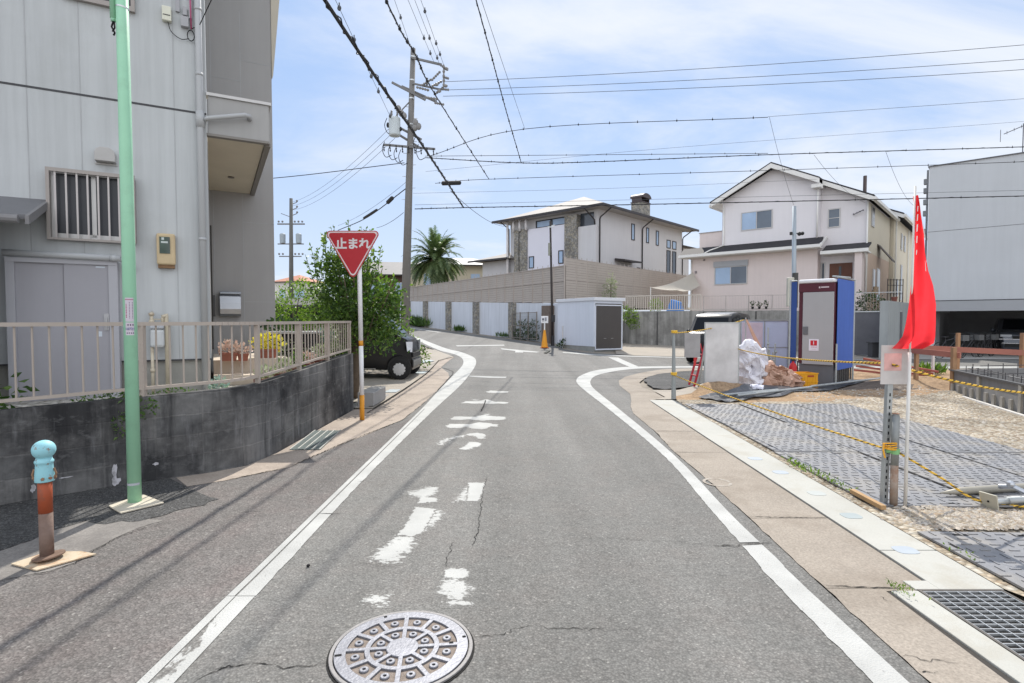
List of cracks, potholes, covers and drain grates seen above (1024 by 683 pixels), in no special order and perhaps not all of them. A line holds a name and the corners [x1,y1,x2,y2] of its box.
drain grate [917,589,1024,661]
drain grate [290,430,341,450]
manhole cover [326,610,475,683]
crack [194,662,324,682]
crack [483,625,635,636]
